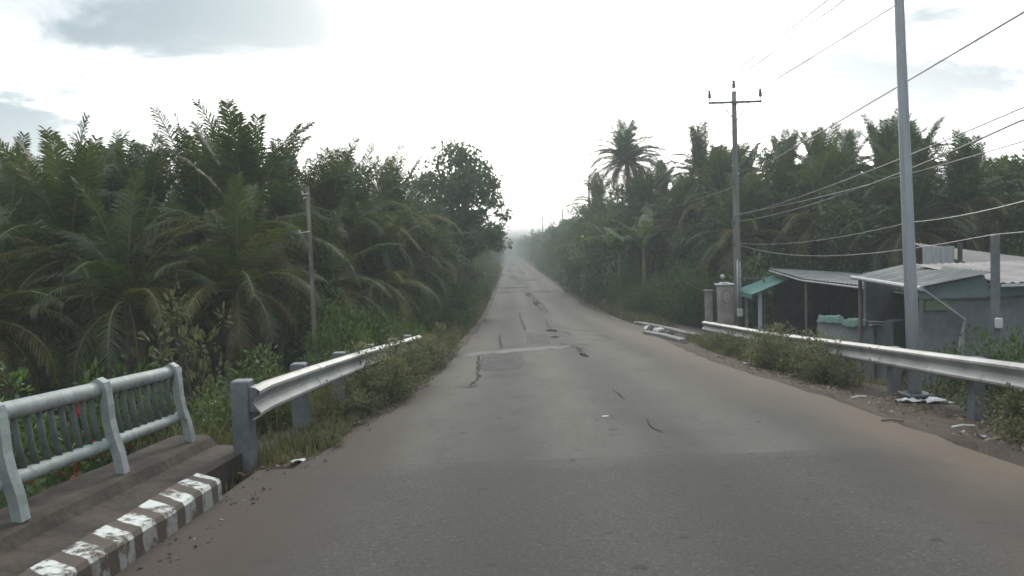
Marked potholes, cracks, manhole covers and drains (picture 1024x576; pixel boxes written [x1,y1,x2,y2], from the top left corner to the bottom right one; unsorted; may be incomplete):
crack [456,356,509,388]
crack [496,256,626,352]
